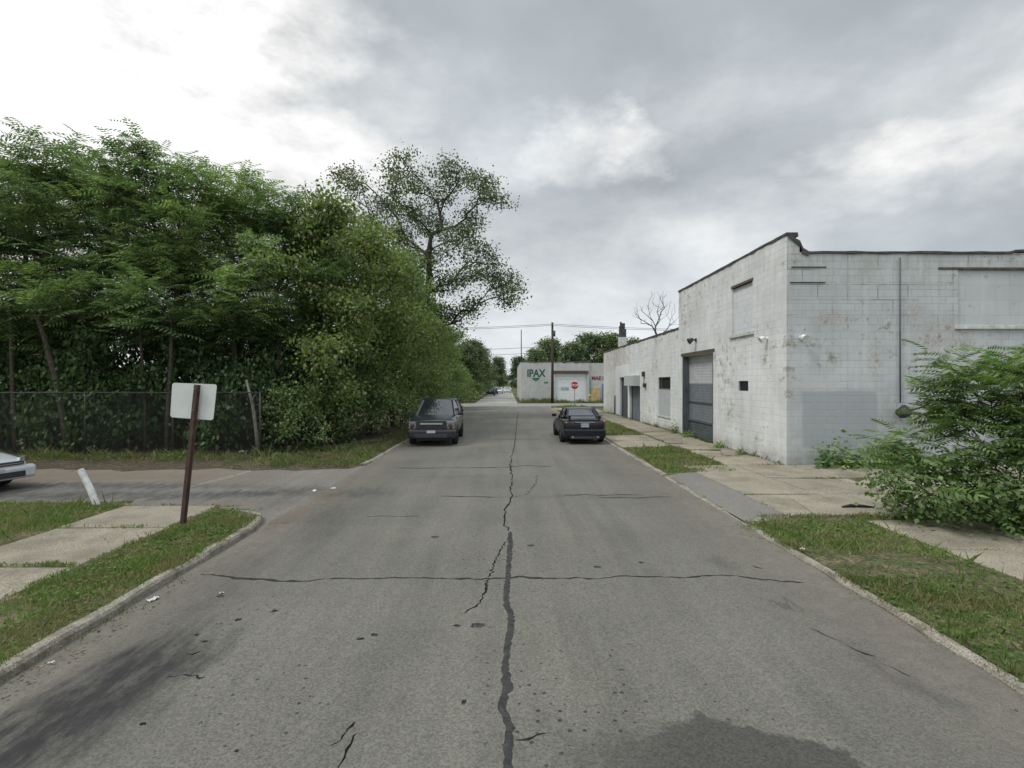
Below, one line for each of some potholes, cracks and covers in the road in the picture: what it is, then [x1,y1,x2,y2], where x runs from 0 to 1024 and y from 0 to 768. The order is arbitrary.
crack [517,732,552,741]
crack [200,566,804,583]
crack [812,629,909,676]
